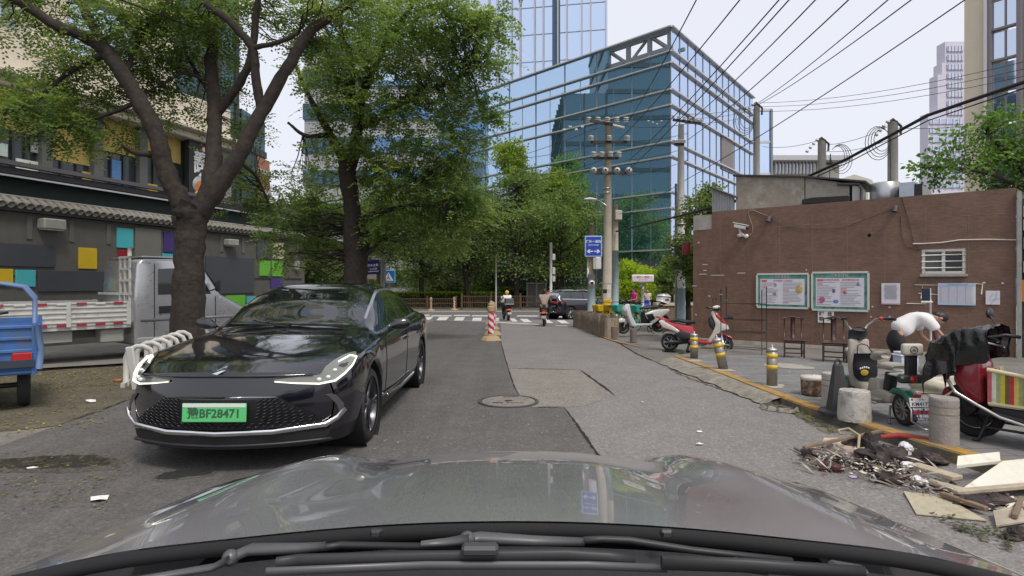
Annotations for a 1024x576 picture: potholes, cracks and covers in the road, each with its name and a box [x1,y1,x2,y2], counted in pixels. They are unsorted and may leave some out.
manhole cover [478,395,539,408]
